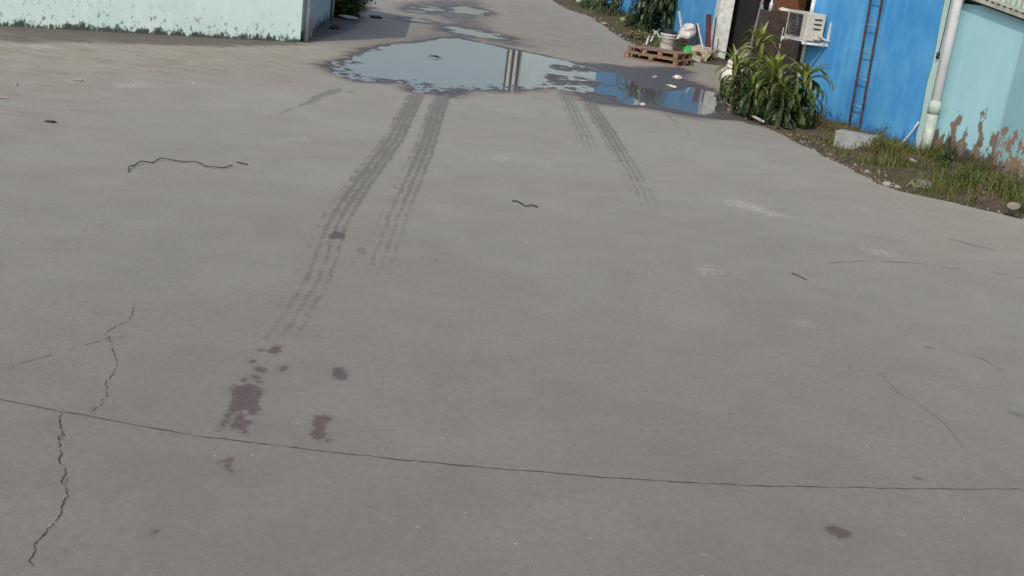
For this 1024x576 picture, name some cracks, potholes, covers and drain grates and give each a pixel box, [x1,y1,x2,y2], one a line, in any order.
crack [12,305,141,411]
crack [29,413,68,565]
